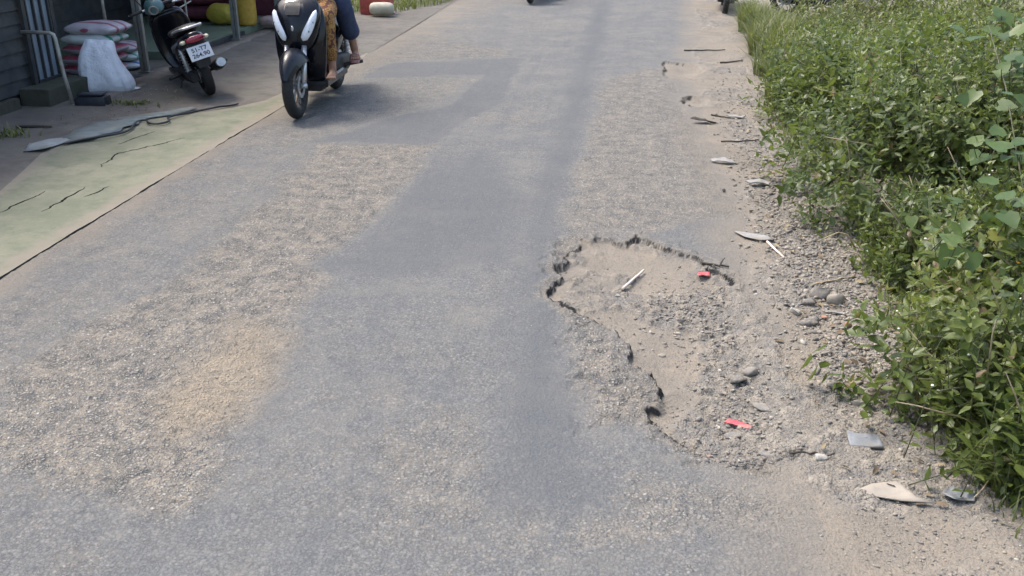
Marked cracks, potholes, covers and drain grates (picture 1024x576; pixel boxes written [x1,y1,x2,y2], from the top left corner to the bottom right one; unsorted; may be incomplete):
pothole [679,95,722,109]
pothole [543,234,814,472]
pothole [660,61,715,80]
